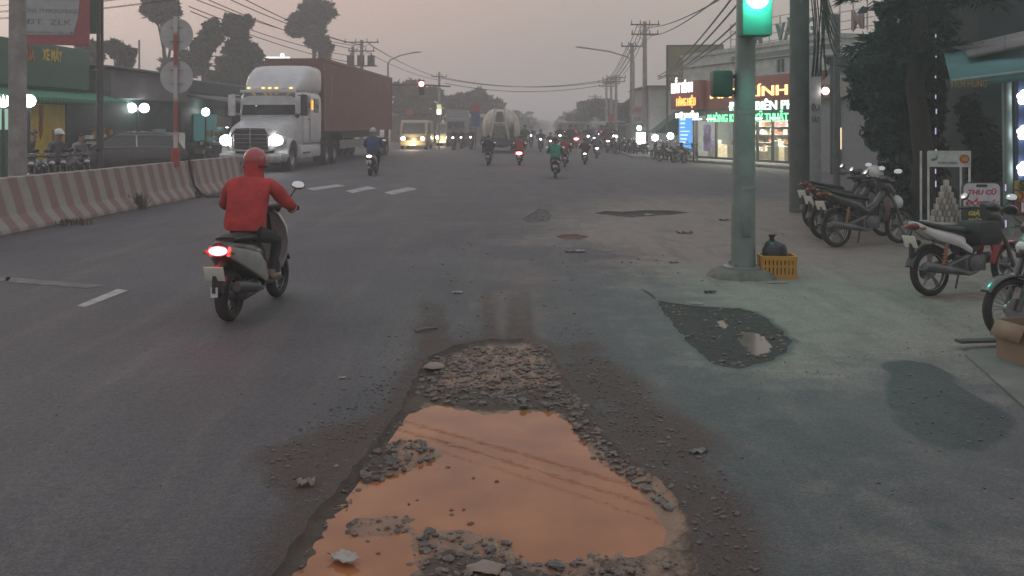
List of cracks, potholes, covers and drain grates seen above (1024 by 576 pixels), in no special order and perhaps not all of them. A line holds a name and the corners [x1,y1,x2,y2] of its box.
pothole [271,339,701,576]
pothole [657,300,792,369]
pothole [522,209,552,223]
